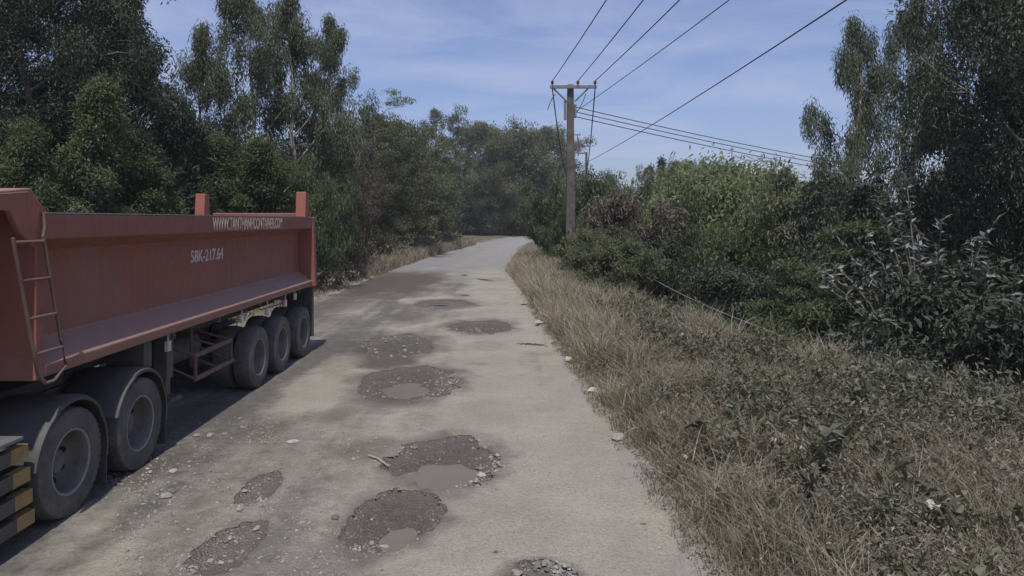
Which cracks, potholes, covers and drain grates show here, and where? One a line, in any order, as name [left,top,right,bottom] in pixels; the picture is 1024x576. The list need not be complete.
pothole [356,366,461,403]
pothole [368,432,506,497]
pothole [511,554,582,576]
pothole [413,300,477,309]
pothole [175,520,270,576]
pothole [356,334,434,360]
pothole [230,468,287,506]
pothole [337,487,453,562]
pothole [448,321,511,334]
